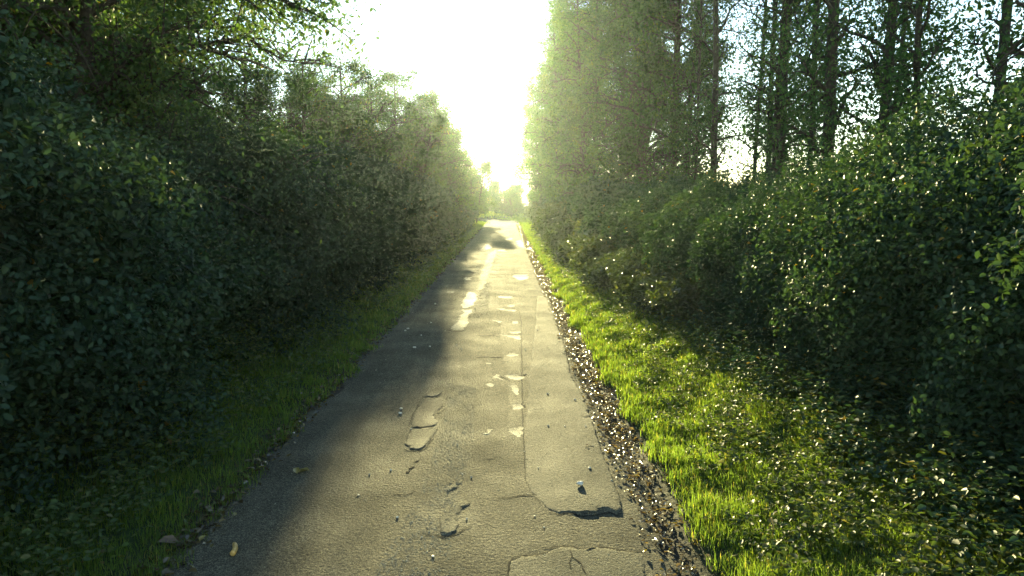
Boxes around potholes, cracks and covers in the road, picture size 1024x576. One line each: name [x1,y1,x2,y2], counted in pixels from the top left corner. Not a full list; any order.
crack [507,545,652,575]
